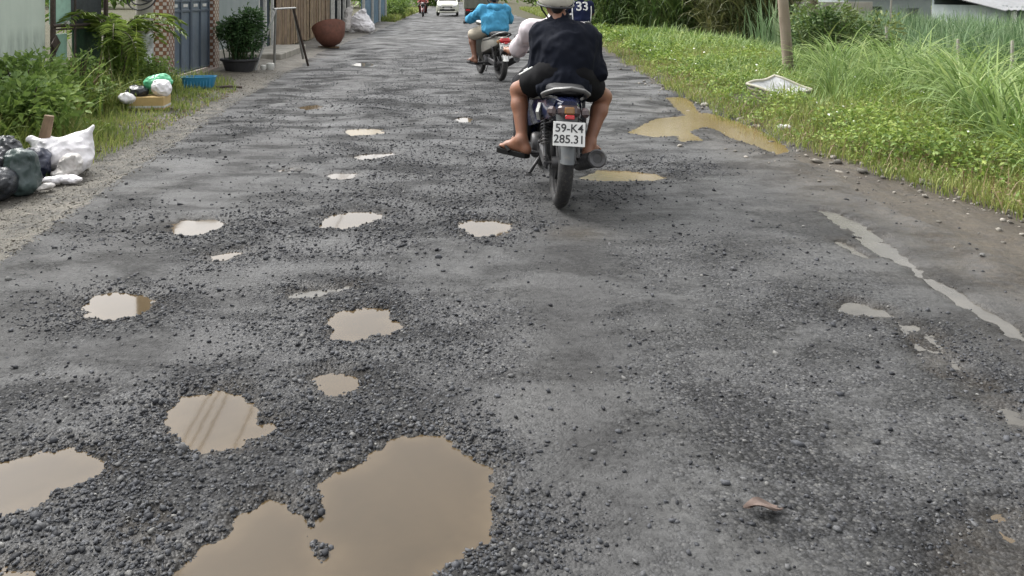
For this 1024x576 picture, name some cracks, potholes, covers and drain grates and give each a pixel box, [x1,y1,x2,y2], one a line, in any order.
pothole [140,478,331,576]
pothole [331,125,399,137]
pothole [0,428,146,531]
pothole [152,211,247,239]
pothole [314,167,375,181]
pothole [823,291,916,321]
pothole [337,148,413,161]
pothole [573,166,681,182]
pothole [306,294,425,347]
pothole [298,414,529,576]
pothole [57,280,184,328]
pothole [301,203,405,232]
